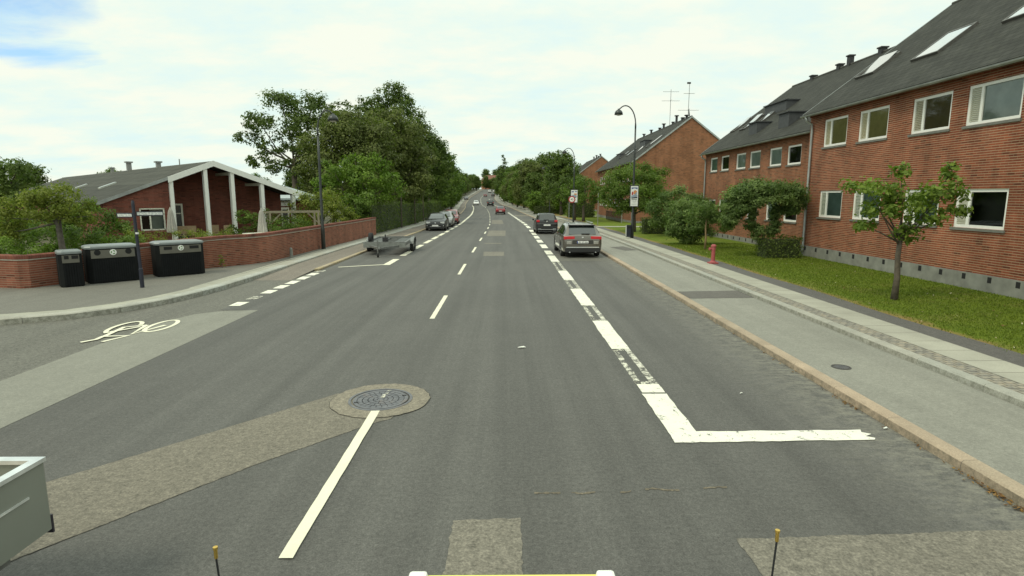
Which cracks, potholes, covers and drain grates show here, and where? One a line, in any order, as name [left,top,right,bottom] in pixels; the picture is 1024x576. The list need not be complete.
manhole cover [348,389,413,411]
crack [520,486,727,494]
